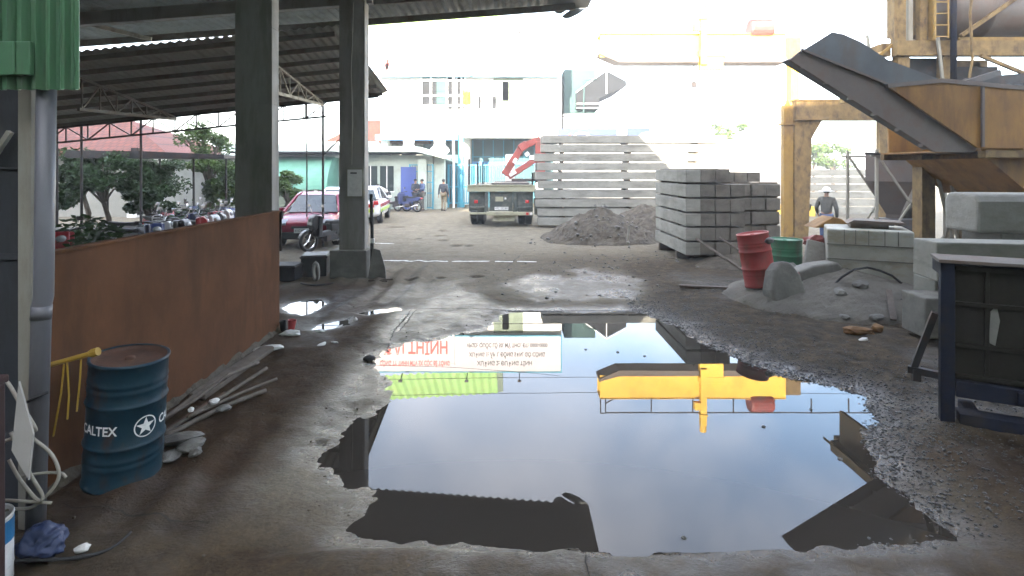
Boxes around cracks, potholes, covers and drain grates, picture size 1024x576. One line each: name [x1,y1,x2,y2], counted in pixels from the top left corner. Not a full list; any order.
pothole [304,316,355,331]
pothole [279,298,331,316]
pothole [354,306,407,316]
pothole [314,310,967,561]
